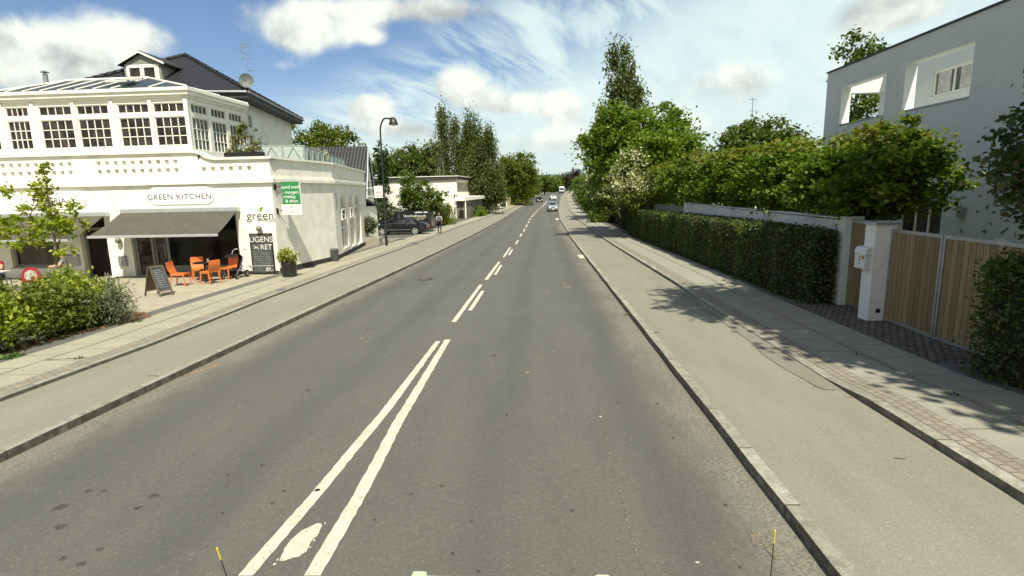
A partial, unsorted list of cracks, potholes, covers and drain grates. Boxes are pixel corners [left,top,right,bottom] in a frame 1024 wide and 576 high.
crack [601,421,647,576]
